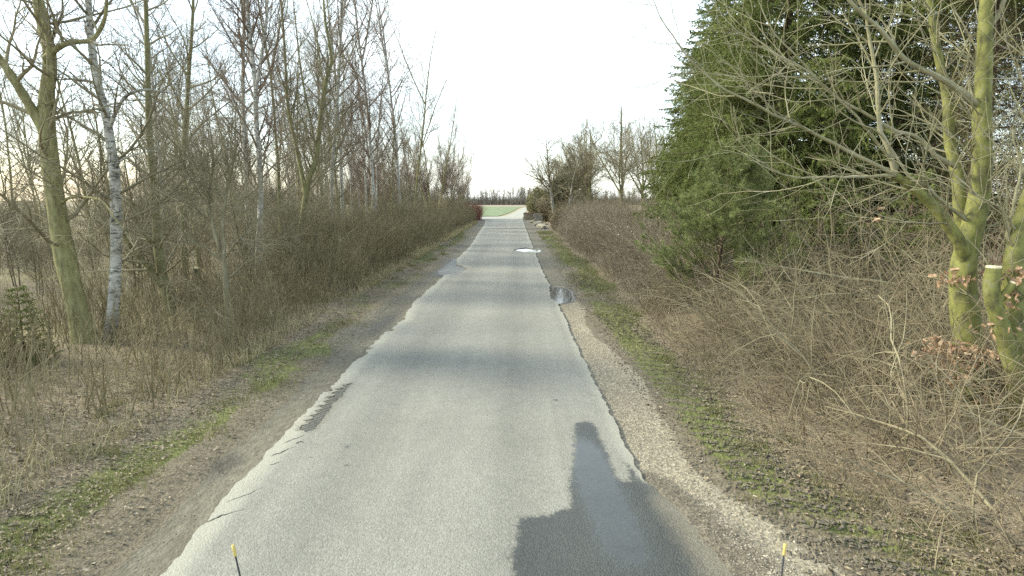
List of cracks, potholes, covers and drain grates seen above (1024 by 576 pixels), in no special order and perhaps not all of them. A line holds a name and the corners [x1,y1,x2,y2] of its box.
pothole [300,384,351,432]
pothole [550,287,575,305]
pothole [437,258,466,276]
